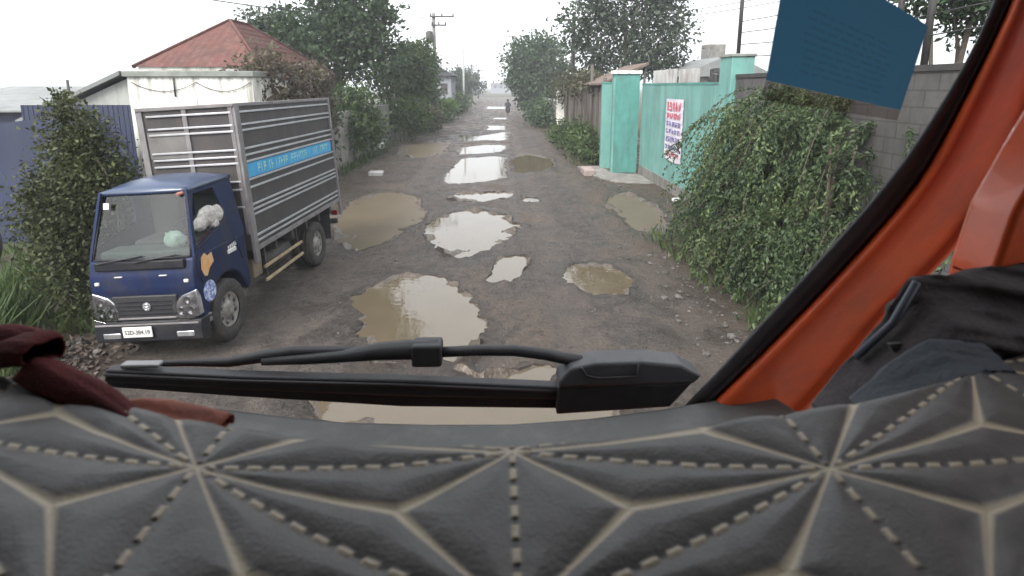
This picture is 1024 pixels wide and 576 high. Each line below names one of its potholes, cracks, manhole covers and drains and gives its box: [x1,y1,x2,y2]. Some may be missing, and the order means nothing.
pothole [554,260,642,300]
pothole [326,189,435,259]
pothole [397,206,533,265]
pothole [333,266,506,377]
pothole [438,155,516,186]
pothole [438,190,525,205]
pothole [449,144,513,156]
pothole [504,153,559,175]
pothole [453,131,514,142]
pothole [393,140,455,159]
pothole [478,252,536,287]
